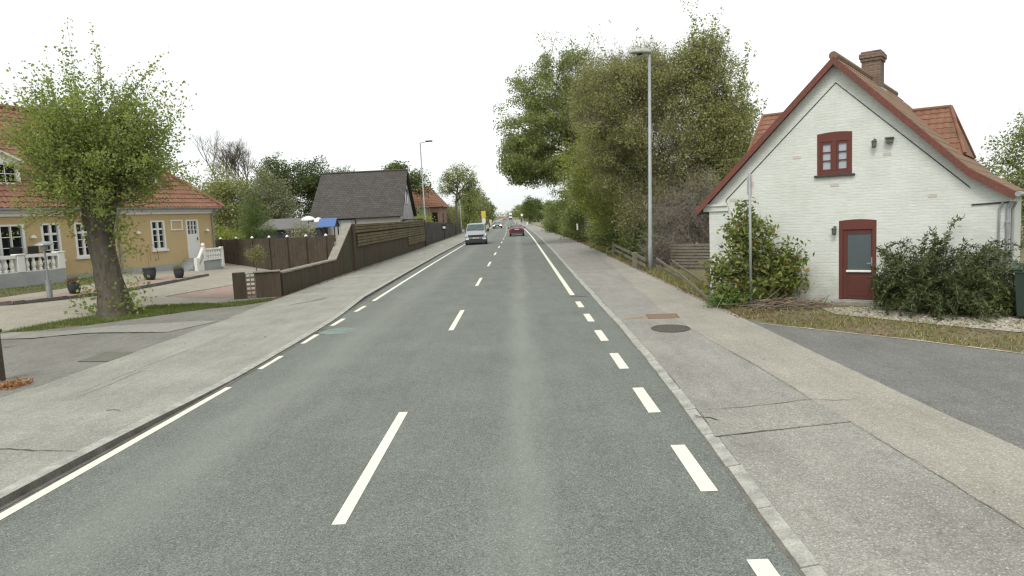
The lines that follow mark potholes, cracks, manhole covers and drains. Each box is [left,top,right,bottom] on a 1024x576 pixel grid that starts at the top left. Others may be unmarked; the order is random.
manhole cover [651,324,690,332]
